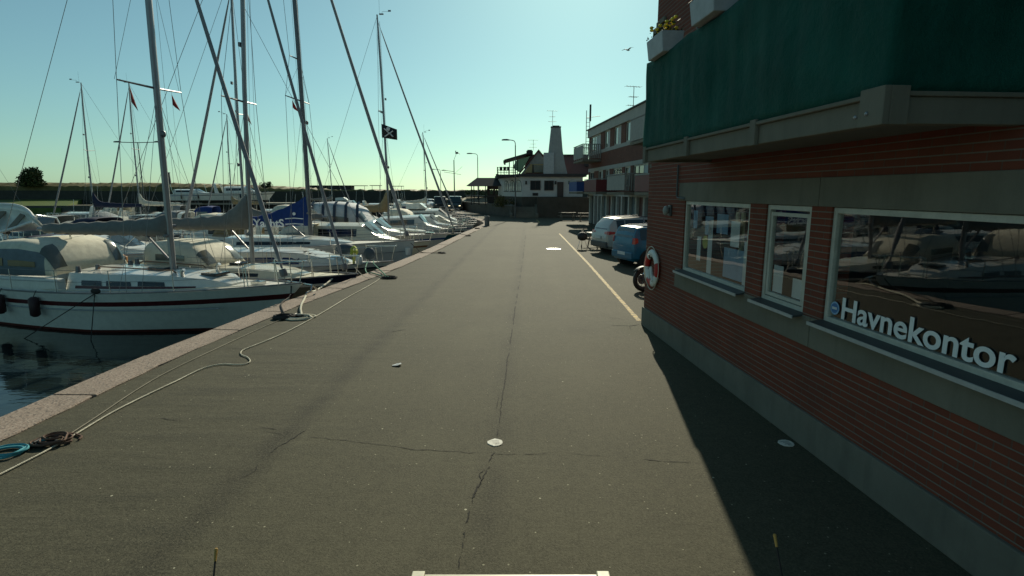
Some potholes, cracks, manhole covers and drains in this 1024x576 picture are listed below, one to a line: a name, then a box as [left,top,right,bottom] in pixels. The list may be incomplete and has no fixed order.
crack [248,235,696,567]
